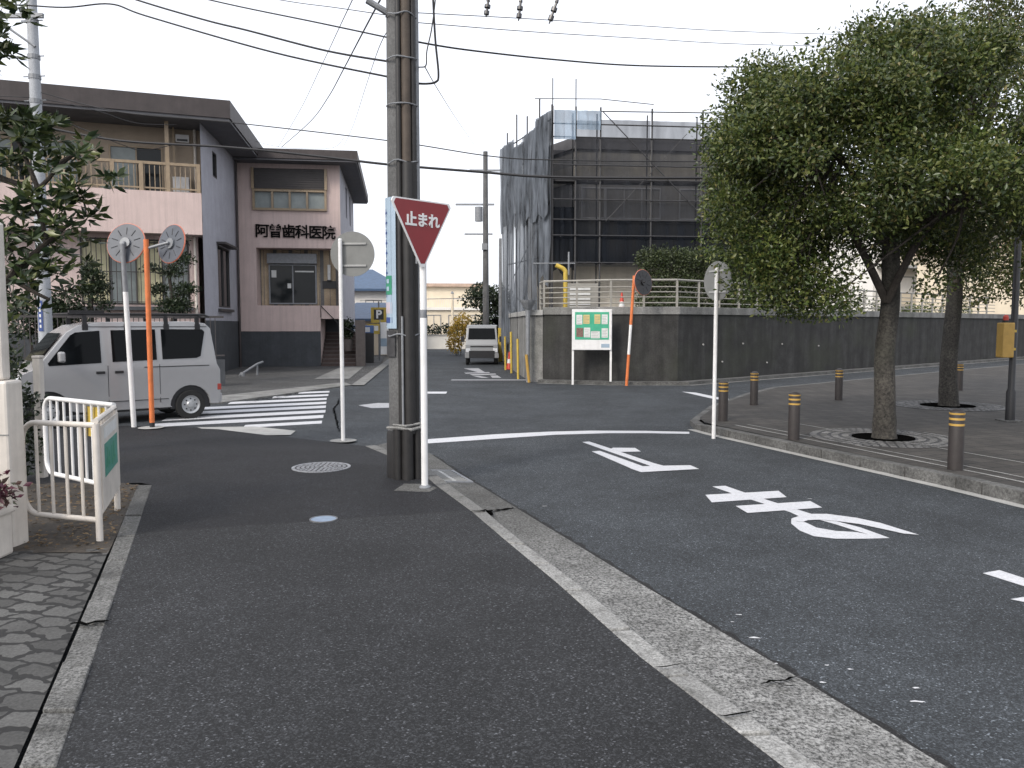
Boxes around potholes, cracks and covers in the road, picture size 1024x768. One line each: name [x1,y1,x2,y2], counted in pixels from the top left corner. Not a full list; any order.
manhole cover [291,462,351,473]
crack [470,507,514,515]
crack [760,676,797,686]
